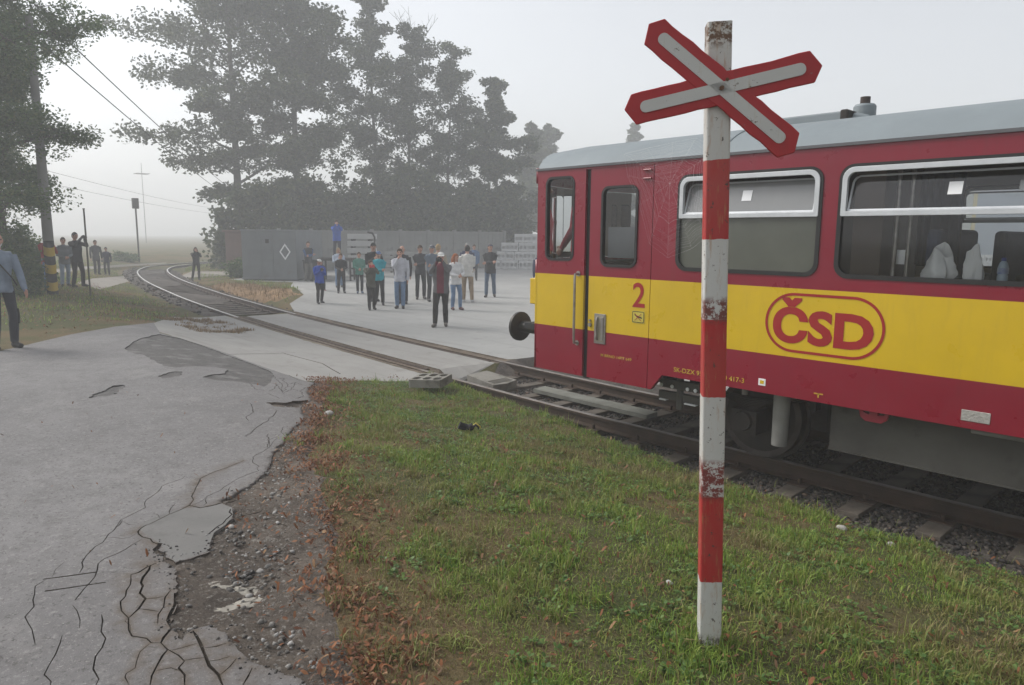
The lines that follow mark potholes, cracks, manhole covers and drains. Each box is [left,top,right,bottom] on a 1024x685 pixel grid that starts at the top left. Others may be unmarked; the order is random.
crack [25,375,306,685]
pothole [125,334,274,387]
pothole [89,385,125,398]
